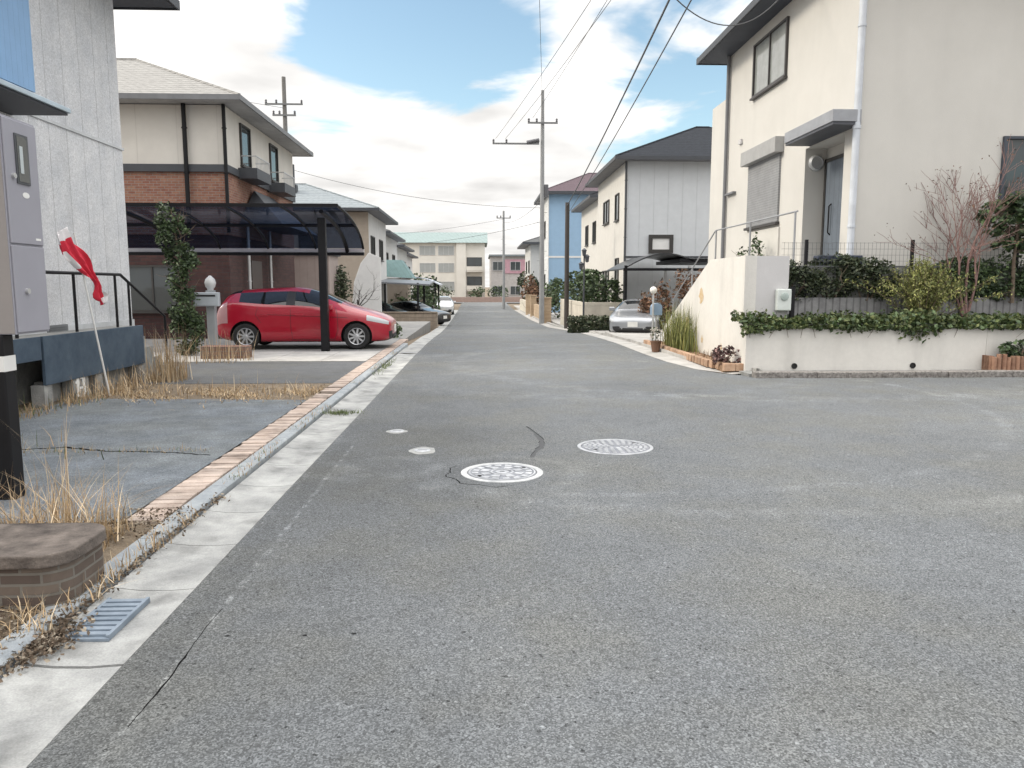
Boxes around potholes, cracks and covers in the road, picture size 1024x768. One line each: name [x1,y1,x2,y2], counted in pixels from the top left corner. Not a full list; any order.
manhole cover [577,439,653,455]
drain grate [65,597,150,642]
utility cover [408,447,435,455]
crack [22,447,208,455]
manhole cover [461,462,543,483]
crack [128,609,222,727]
